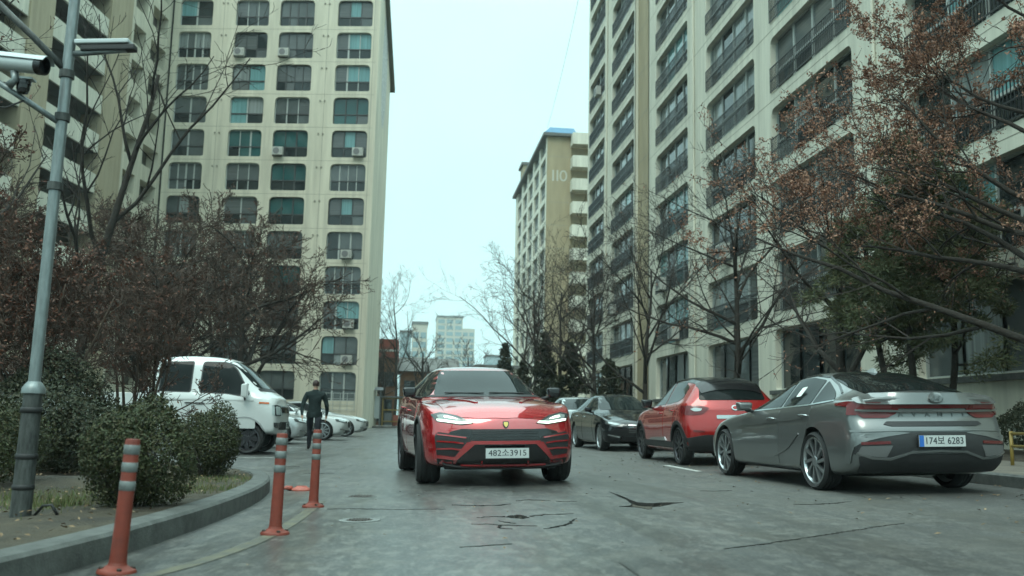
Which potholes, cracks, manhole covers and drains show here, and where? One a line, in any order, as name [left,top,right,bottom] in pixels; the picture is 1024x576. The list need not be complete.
crack [461,500,577,547]
